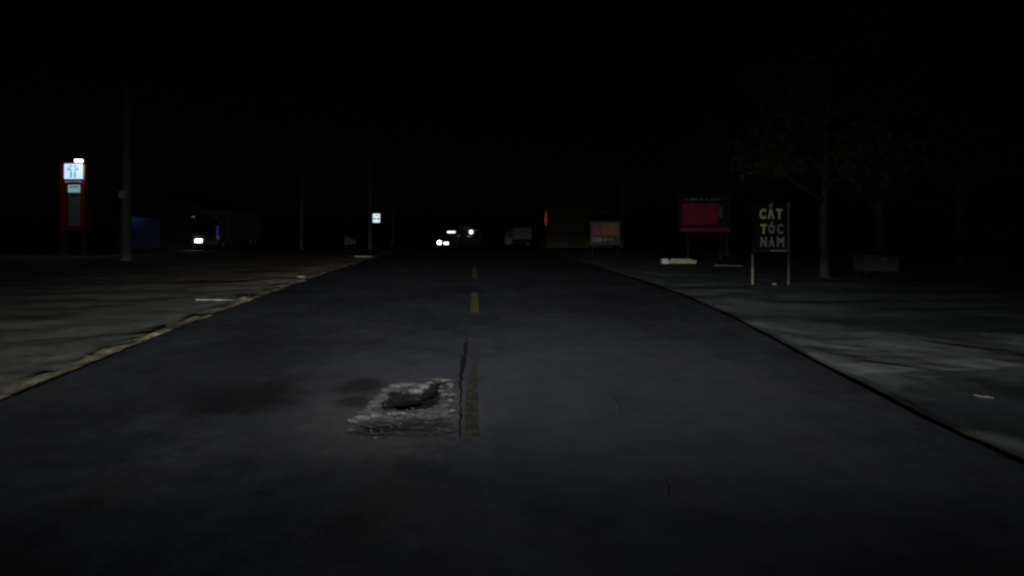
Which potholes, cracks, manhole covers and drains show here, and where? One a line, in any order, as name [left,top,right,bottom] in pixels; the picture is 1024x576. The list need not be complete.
crack [458,336,468,438]
pothole [342,378,460,441]
